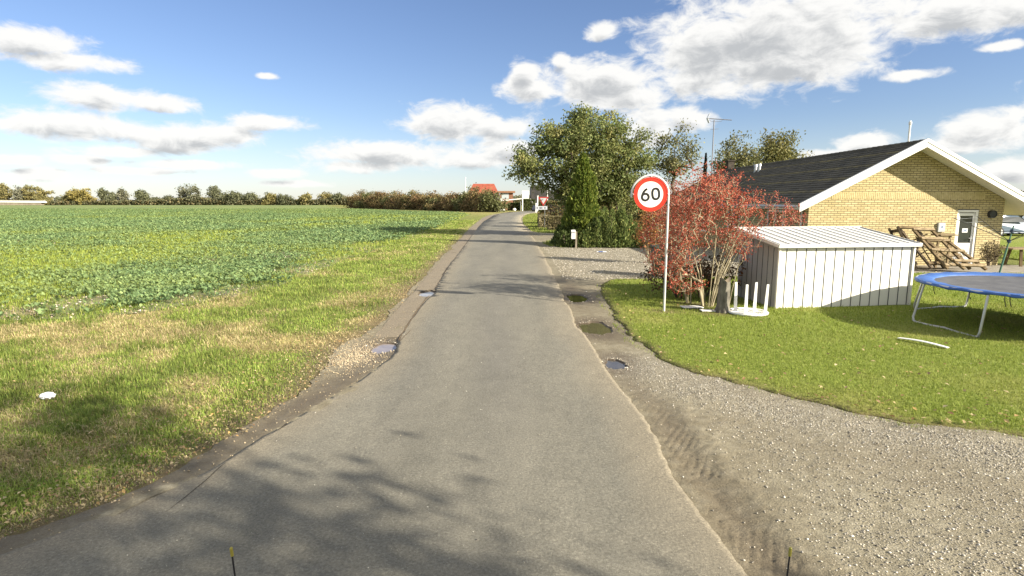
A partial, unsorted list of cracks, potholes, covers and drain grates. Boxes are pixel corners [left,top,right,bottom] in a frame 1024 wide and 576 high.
pothole [362,338,399,356]
pothole [602,356,631,371]
pothole [575,317,626,337]
pothole [564,291,594,303]
